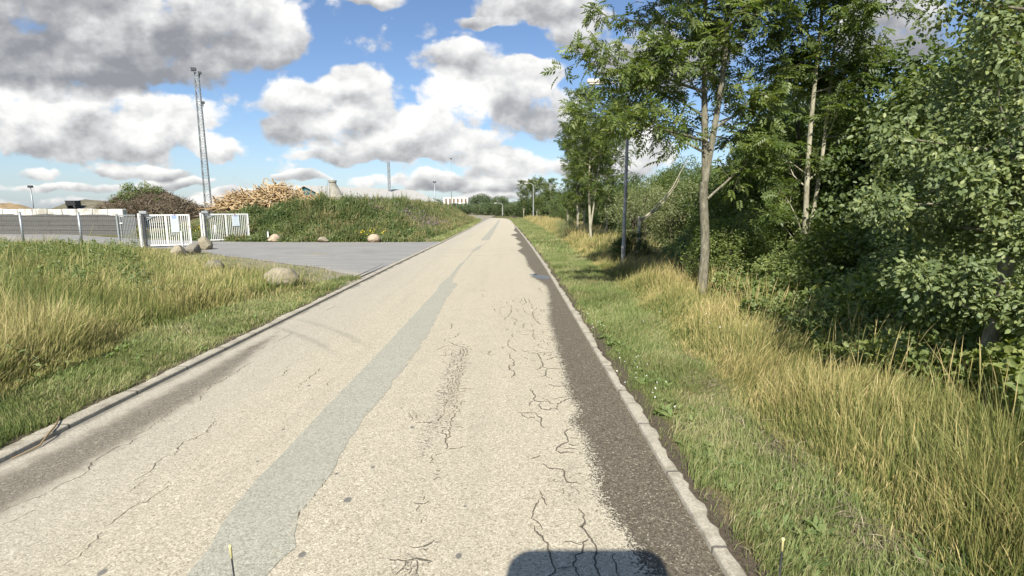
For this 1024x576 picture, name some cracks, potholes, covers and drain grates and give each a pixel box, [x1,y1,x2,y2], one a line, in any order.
crack [388,540,436,575]
crack [408,288,621,576]
crack [1,328,293,565]
crack [281,367,330,387]
